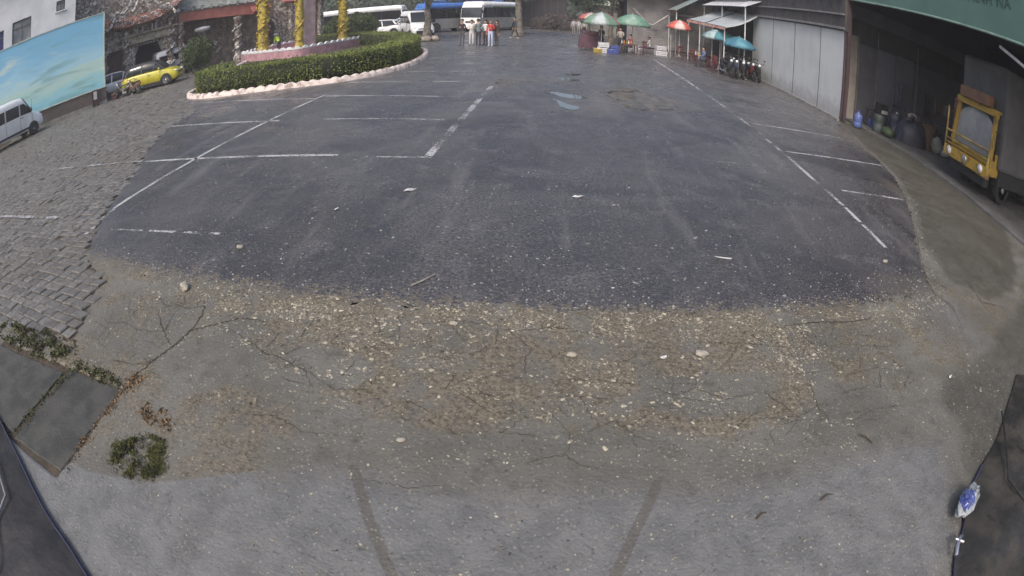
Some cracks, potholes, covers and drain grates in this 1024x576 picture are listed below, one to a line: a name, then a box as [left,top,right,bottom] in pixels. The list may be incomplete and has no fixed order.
crack [652,318,914,443]
crack [530,406,597,469]
crack [89,295,691,437]
